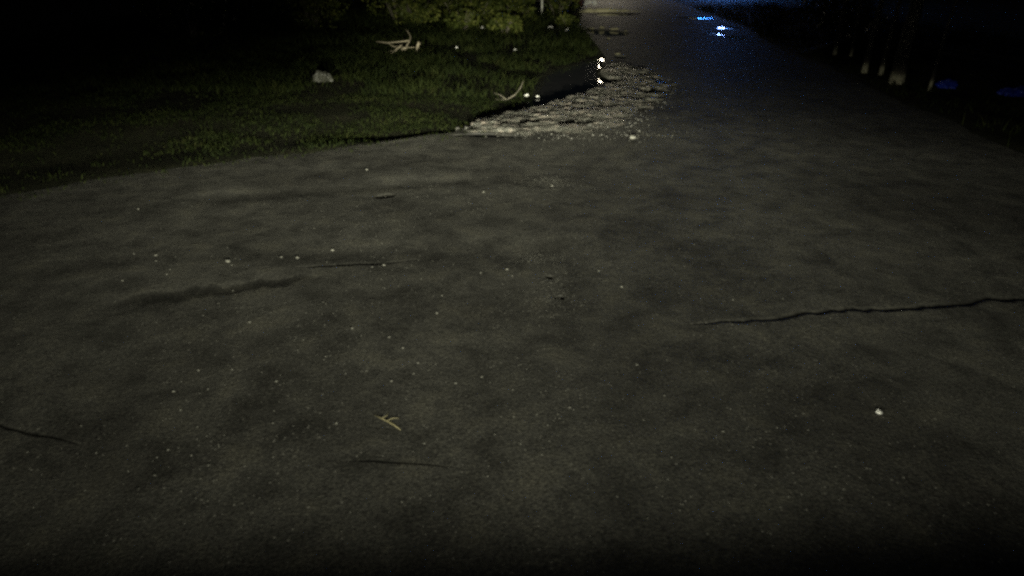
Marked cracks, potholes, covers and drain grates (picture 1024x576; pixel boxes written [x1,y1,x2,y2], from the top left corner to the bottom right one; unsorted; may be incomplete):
crack [296,258,417,268]
crack [340,459,461,468]
crack [689,295,1024,325]
crack [0,423,81,445]
